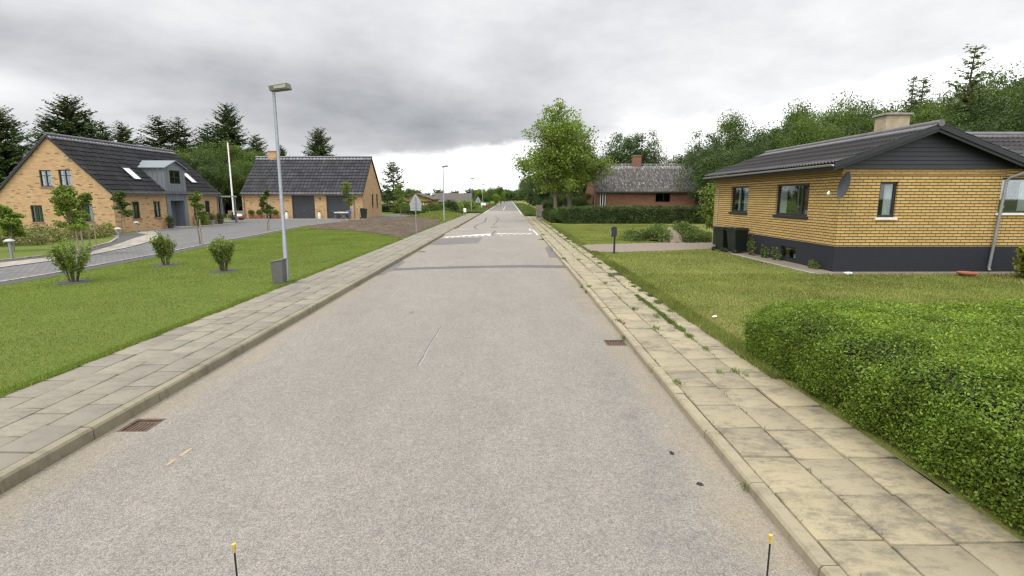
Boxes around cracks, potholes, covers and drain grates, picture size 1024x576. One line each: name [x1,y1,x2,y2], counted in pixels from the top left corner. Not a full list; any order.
crack [418,326,443,365]
